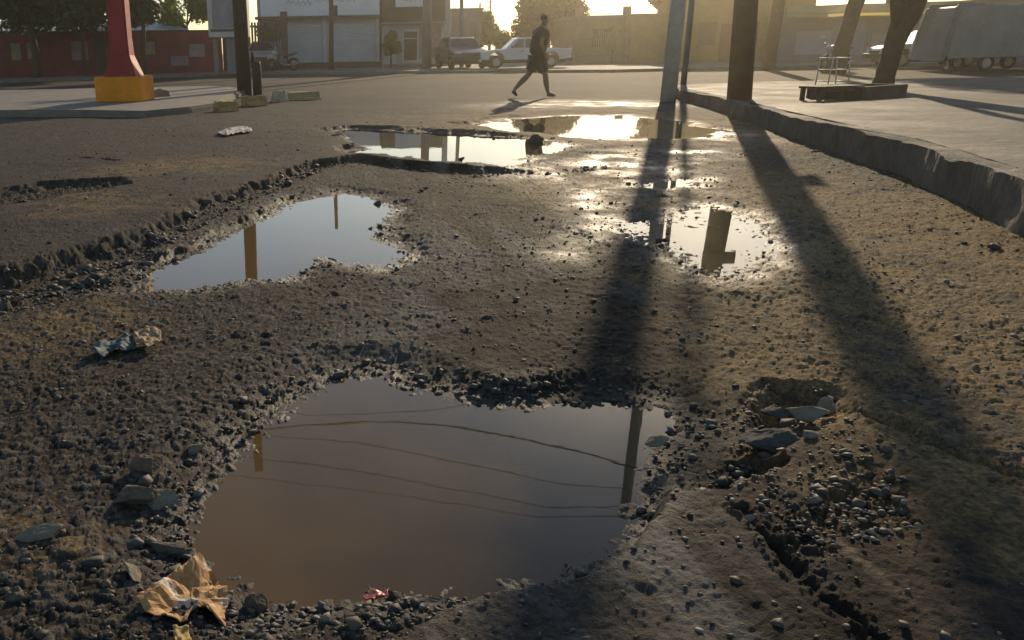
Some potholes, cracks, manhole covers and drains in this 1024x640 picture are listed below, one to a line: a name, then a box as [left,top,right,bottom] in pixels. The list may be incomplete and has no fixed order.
crack [728,500,896,640]
pothole [728,376,865,434]
pothole [87,344,737,640]
pothole [552,197,849,302]
pothole [0,176,133,205]
pothole [314,124,592,169]
pothole [0,185,450,312]
